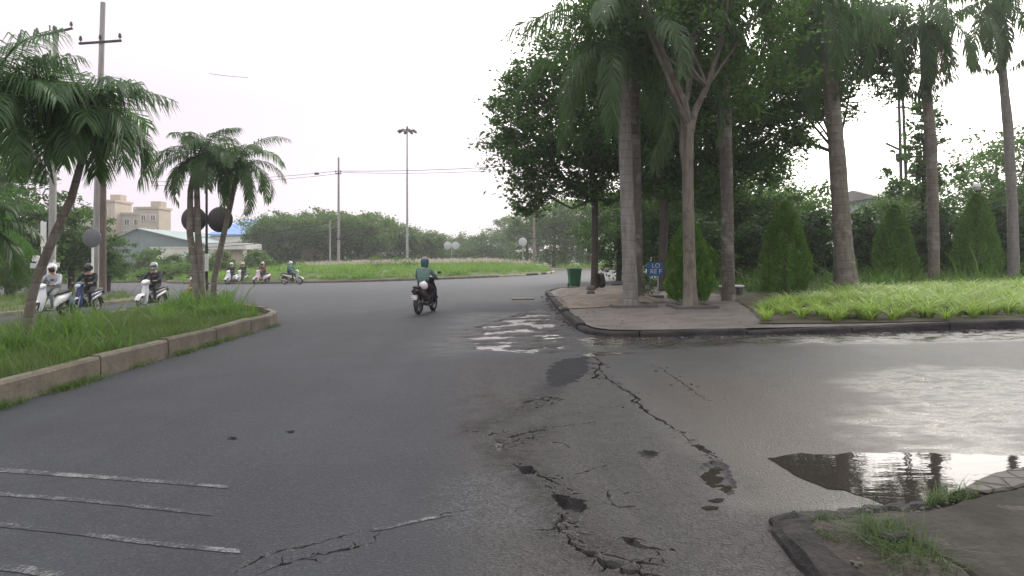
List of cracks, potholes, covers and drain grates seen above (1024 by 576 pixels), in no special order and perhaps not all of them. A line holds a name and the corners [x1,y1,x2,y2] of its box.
crack [606,537,675,564]
pothole [518,466,537,474]
pothole [551,494,588,513]
crack [577,463,639,508]
pothole [638,450,660,459]
crack [458,356,725,463]
pothole [694,459,737,495]
